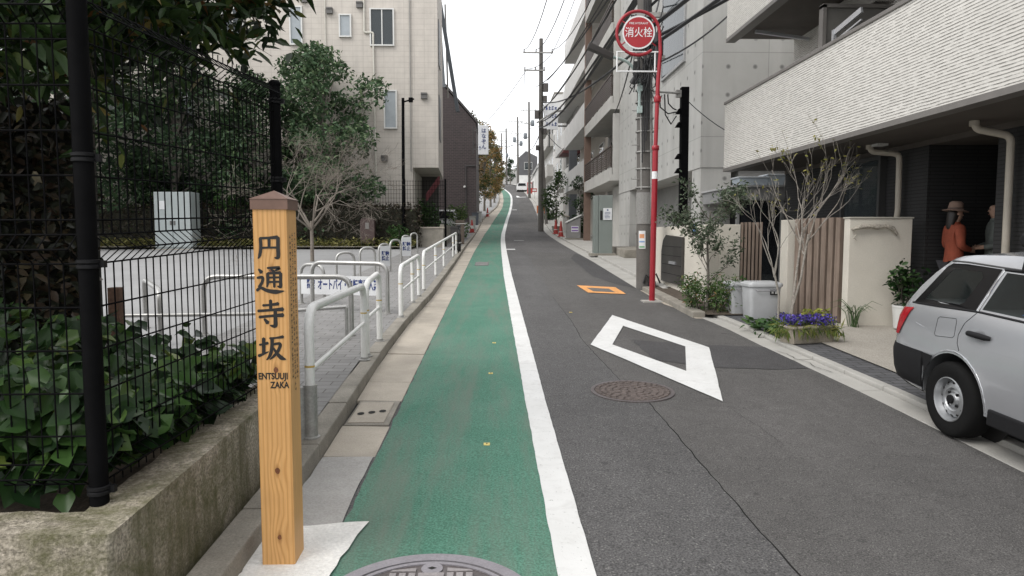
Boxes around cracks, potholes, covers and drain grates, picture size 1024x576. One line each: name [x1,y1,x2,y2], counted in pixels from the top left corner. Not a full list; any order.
crack [650,404,801,576]
manhole cover [344,554,521,576]
manhole cover [591,380,675,404]
